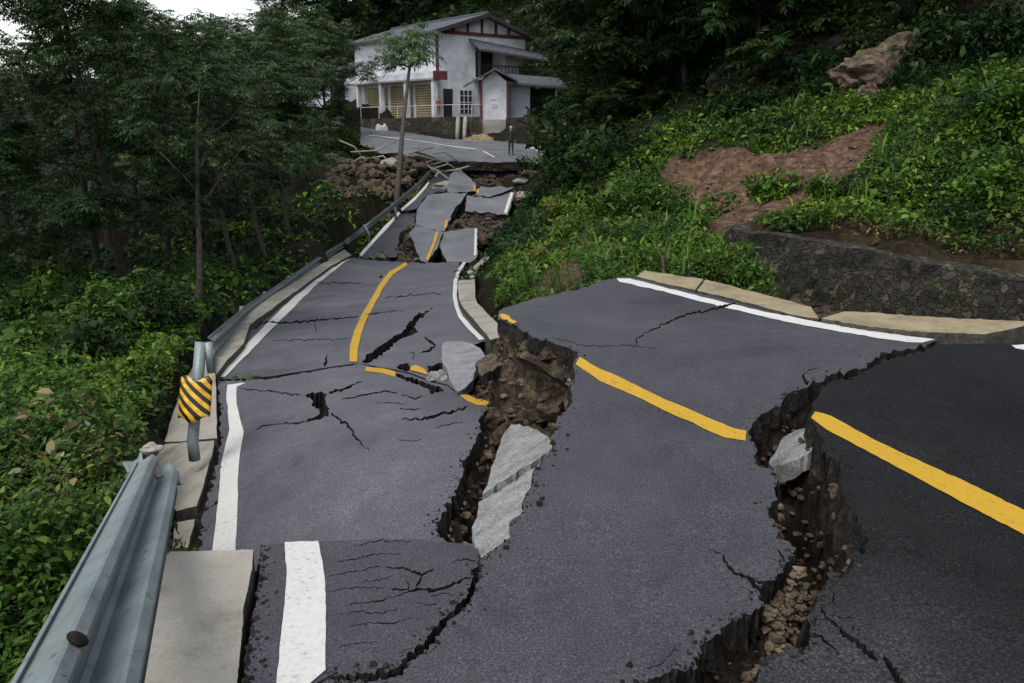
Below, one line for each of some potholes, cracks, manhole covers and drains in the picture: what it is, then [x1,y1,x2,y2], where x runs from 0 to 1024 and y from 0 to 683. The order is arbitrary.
pothole [304,392,329,422]
crack [262,292,736,648]
crack [702,368,903,683]
crack [395,219,418,263]
